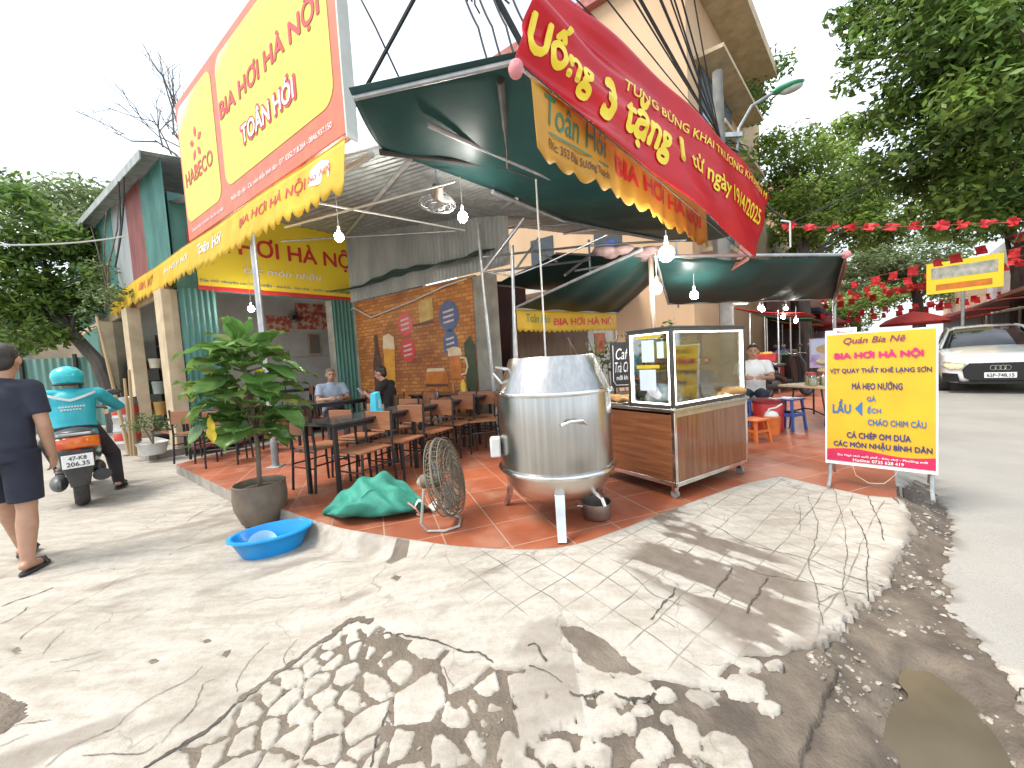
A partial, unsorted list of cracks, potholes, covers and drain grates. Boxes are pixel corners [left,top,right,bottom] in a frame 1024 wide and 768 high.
crack [623,568,682,627]
crack [46,597,493,768]
crack [528,643,656,703]
crack [714,488,899,624]
crack [2,569,140,639]
